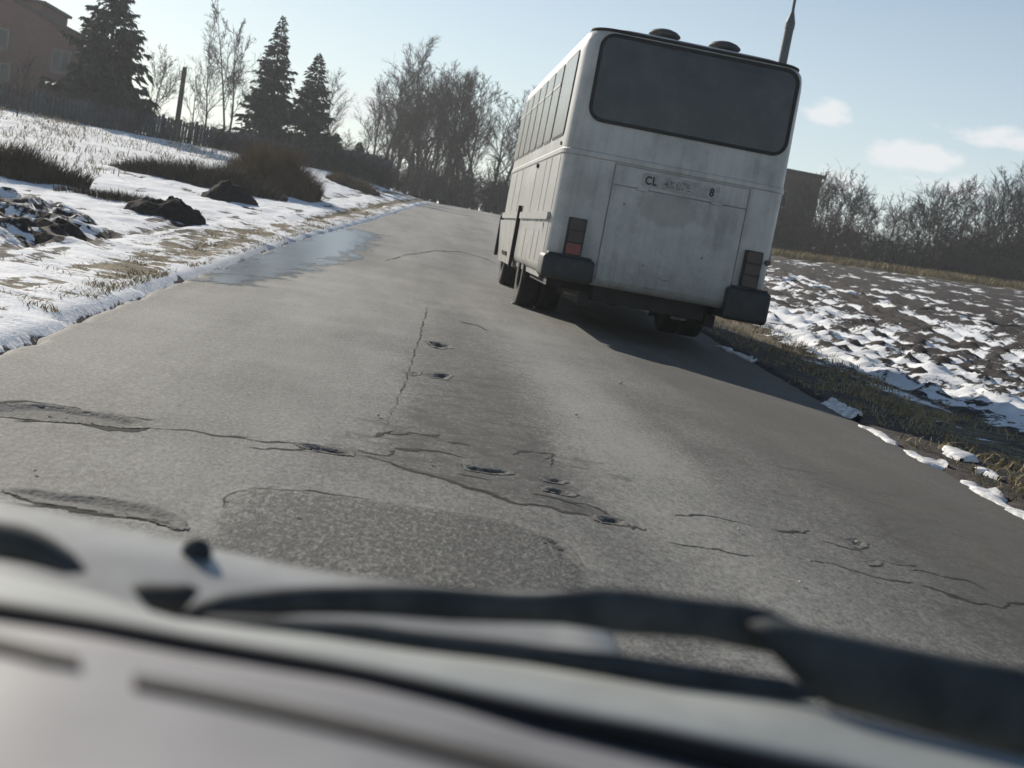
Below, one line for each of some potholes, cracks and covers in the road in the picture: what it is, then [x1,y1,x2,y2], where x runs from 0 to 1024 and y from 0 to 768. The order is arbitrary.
crack [0,400,610,516]
pothole [540,486,579,497]
pothole [426,341,454,350]
crack [772,529,1024,608]
pothole [462,458,515,475]
pothole [591,514,630,526]
crack [670,542,747,556]
pothole [538,476,570,484]
